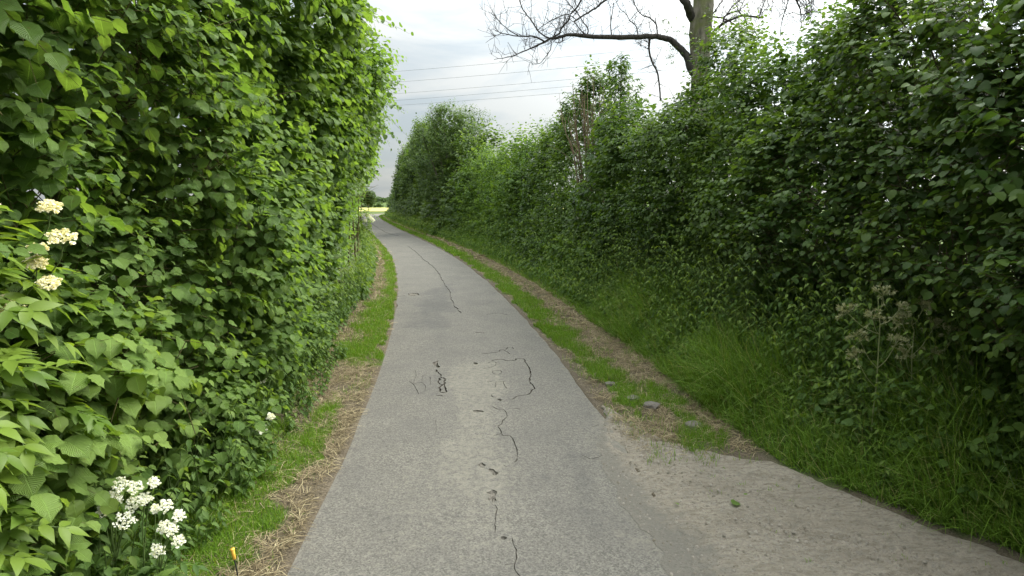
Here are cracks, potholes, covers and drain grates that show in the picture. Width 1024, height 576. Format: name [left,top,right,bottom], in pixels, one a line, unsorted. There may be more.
crack [409,370,447,396]
crack [483,347,535,467]
crack [494,505,520,576]
